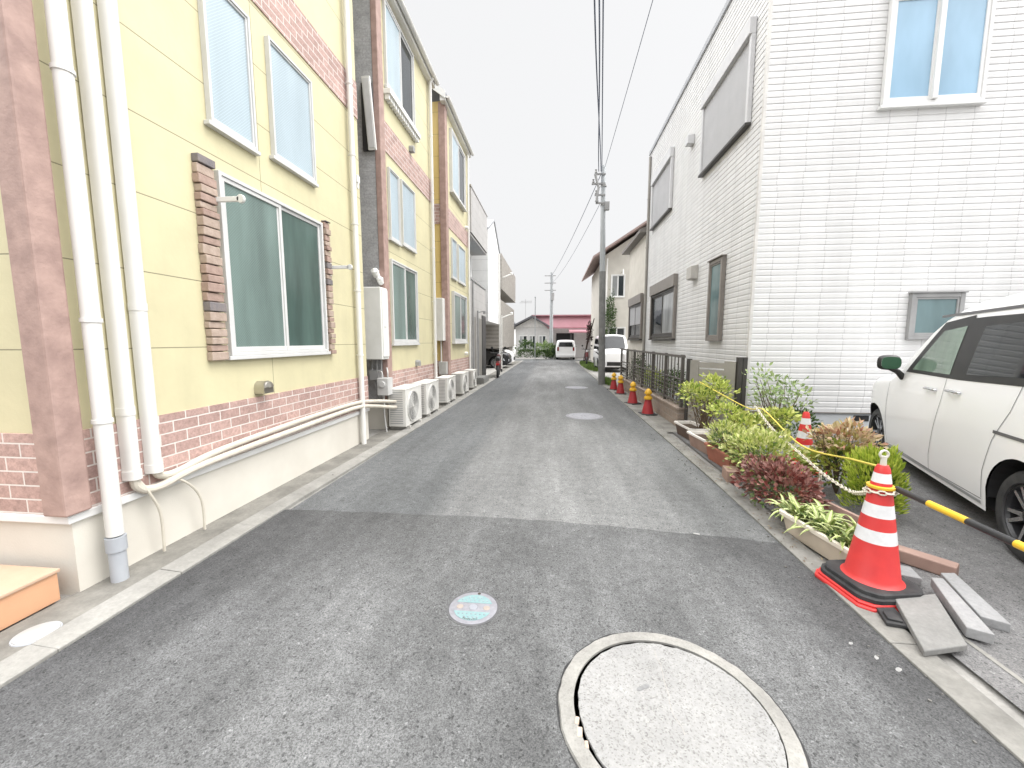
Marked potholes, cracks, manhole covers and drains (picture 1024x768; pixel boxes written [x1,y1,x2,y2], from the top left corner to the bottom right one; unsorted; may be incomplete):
manhole cover [556,632,812,768]
manhole cover [447,591,500,627]
